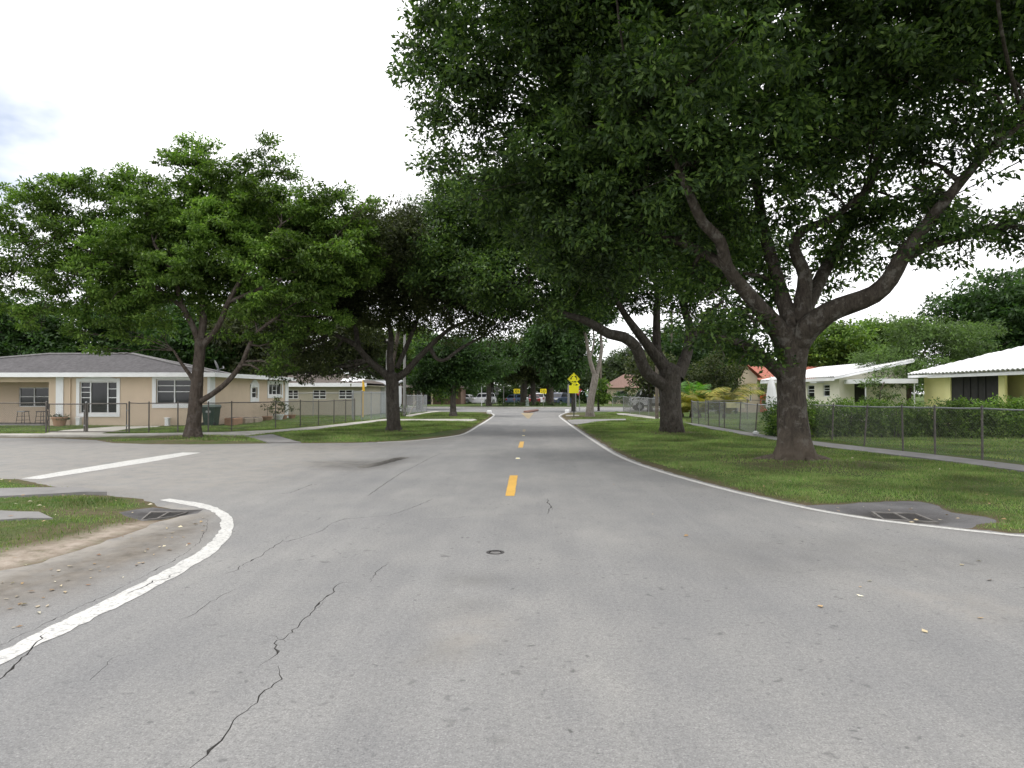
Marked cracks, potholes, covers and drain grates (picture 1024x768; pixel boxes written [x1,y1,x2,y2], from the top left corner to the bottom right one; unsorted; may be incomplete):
crack [0,636,43,679]
crack [190,583,341,768]
drain grate [120,508,203,521]
crack [232,502,426,572]
drain grate [798,501,996,529]
